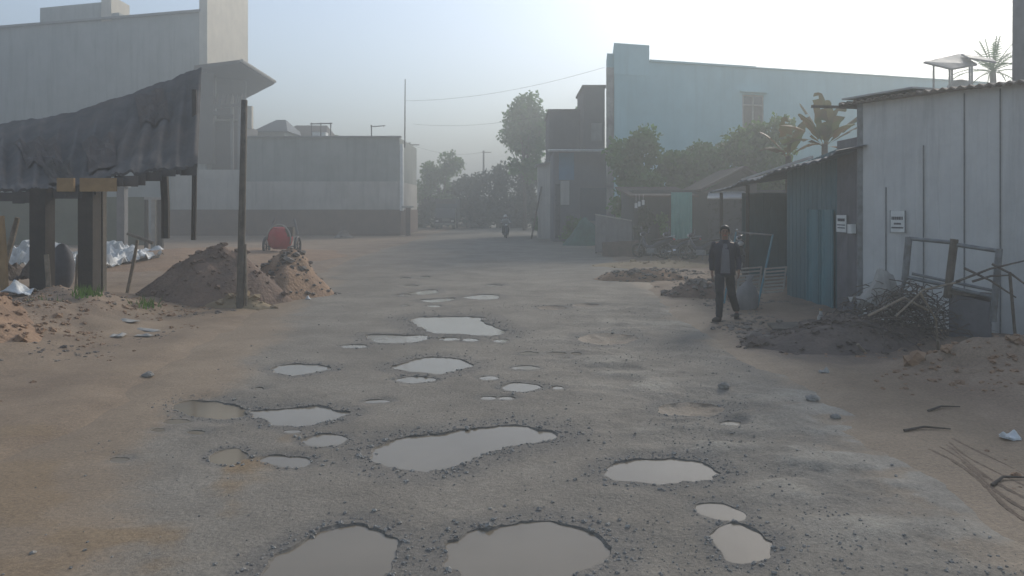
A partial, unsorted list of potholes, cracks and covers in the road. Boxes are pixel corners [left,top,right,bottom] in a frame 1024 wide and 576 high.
pothole [355,332,444,346]
pothole [261,359,343,378]
pothole [203,442,258,467]
pothole [396,499,697,576]
pothole [212,501,435,576]
pothole [250,451,325,473]
pothole [298,413,610,490]
pothole [385,374,446,384]
pothole [491,380,553,393]
pothole [387,310,535,345]
pothole [695,517,798,572]
pothole [694,502,747,521]
